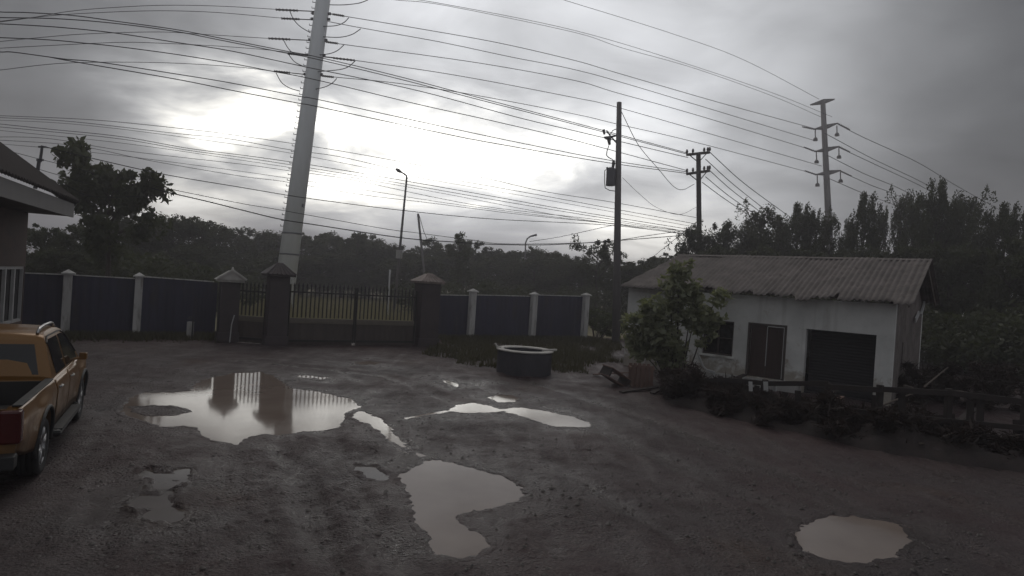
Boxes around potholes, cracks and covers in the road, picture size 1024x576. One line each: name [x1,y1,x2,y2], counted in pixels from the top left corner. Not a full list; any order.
pothole [349,409,435,461]
pothole [394,456,530,562]
pothole [399,401,598,428]
pothole [112,464,199,528]
pothole [112,371,365,446]
pothole [786,512,920,567]
pothole [345,462,396,482]
